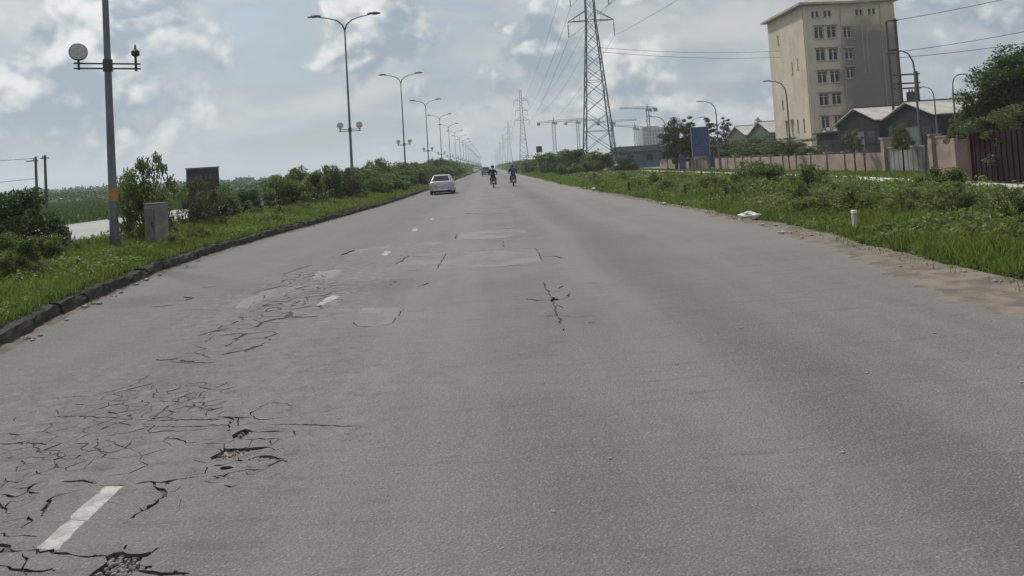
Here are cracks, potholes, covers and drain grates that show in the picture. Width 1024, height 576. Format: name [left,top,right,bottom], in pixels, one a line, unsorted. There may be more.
pothole [89,551,151,576]
pothole [210,447,268,460]
pothole [232,429,252,439]
crack [0,360,350,576]
